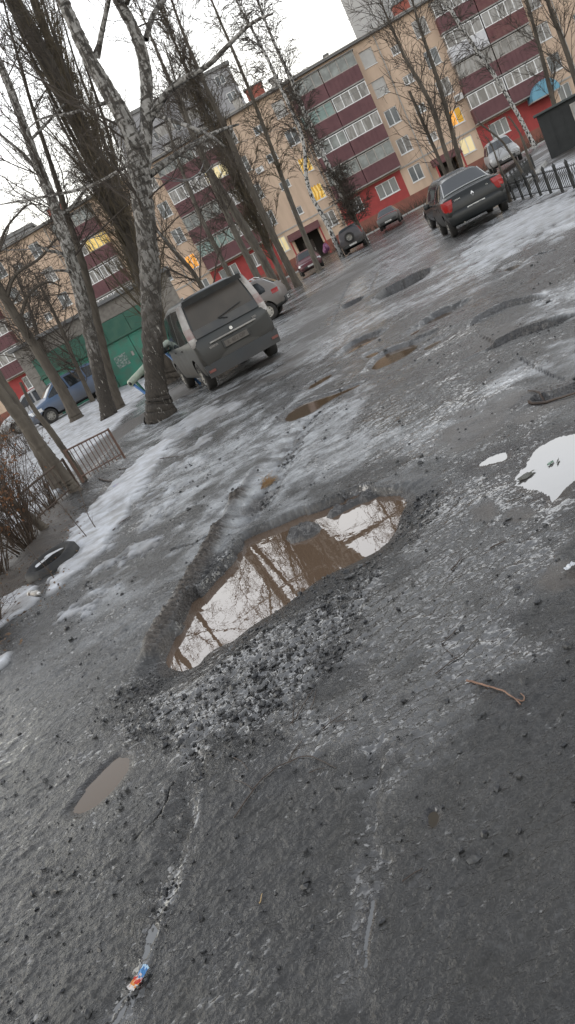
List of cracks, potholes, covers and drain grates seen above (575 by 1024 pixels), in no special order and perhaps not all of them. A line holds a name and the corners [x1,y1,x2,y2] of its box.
pothole [67,753,133,816]
pothole [302,371,336,392]
pothole [370,266,437,303]
pothole [366,339,424,372]
pothole [280,381,364,424]
pothole [339,294,368,311]
crack [131,782,175,841]
pothole [154,482,416,679]
